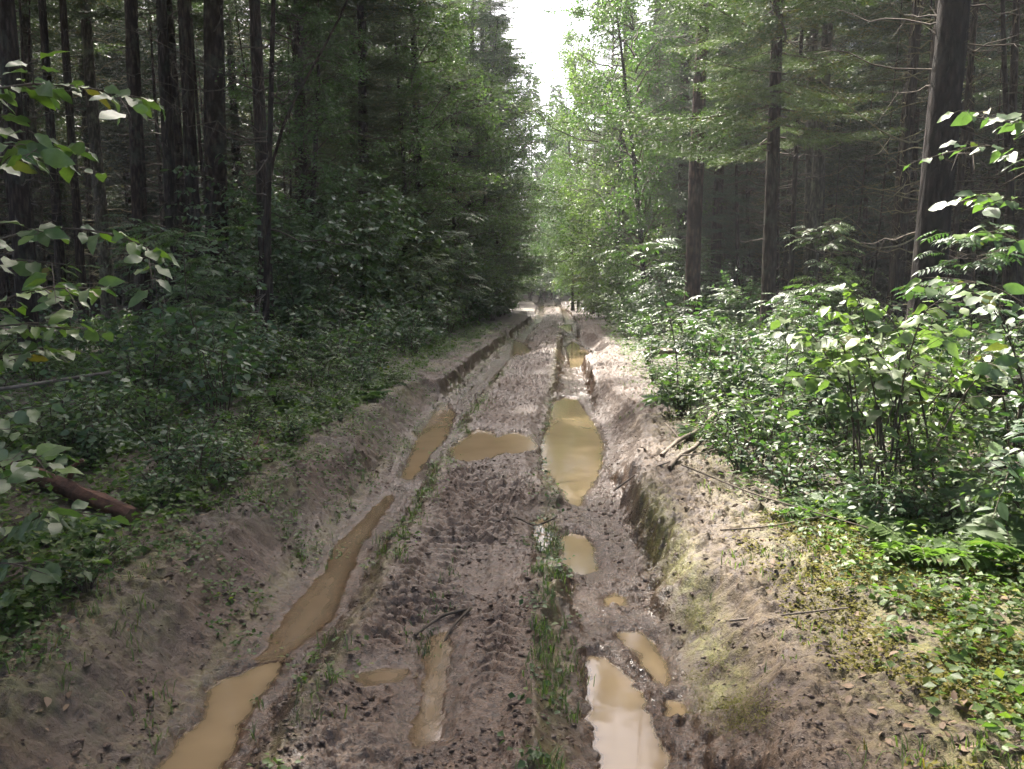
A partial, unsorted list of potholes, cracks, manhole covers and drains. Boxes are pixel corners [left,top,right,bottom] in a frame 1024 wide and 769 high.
pothole [440,422,540,464]
pothole [565,639,694,769]
